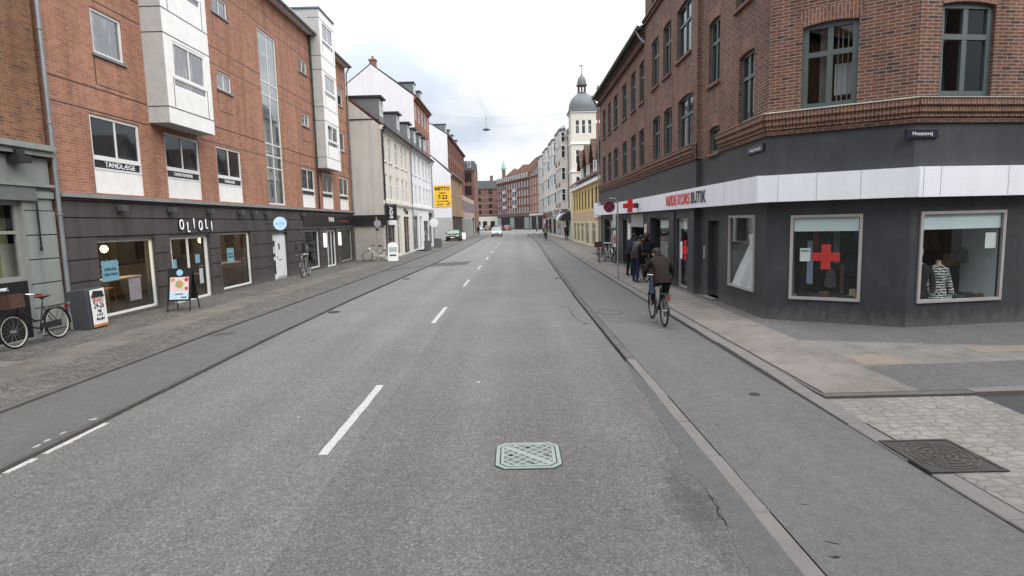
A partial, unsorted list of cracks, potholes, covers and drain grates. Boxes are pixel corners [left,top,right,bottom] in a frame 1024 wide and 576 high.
manhole cover [878,439,1010,476]
